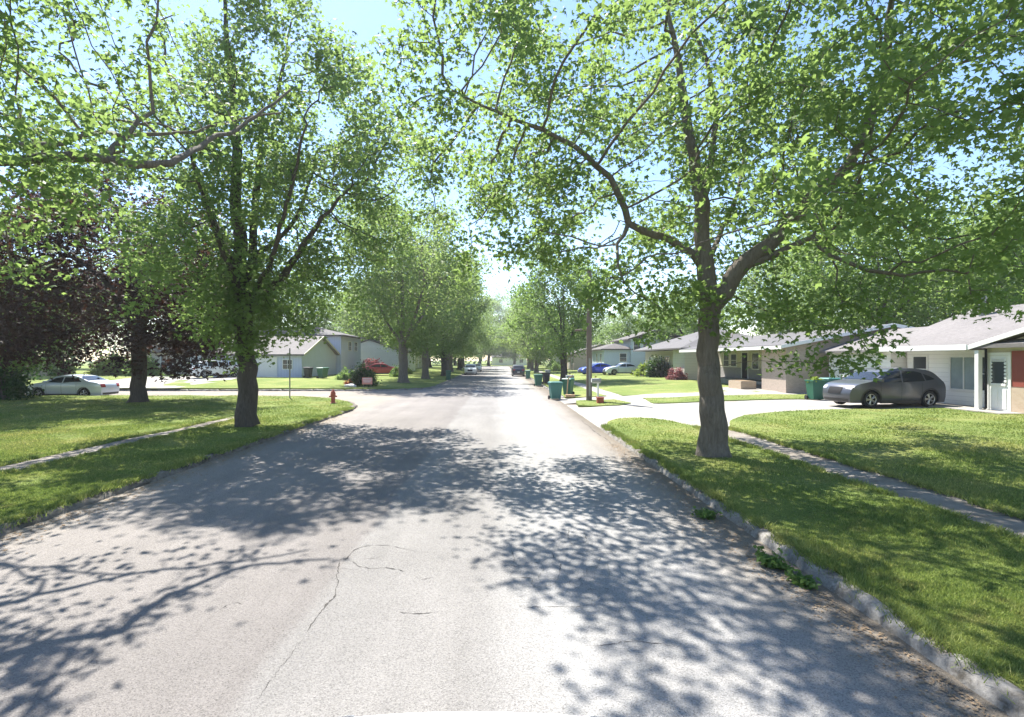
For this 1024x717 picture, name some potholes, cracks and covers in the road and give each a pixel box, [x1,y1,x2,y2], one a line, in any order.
crack [255,545,431,703]
